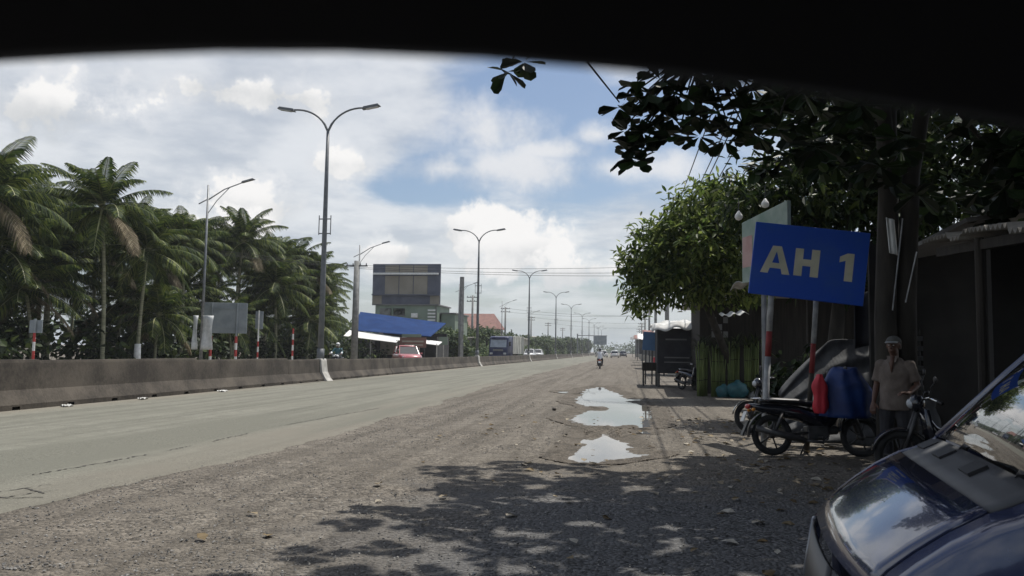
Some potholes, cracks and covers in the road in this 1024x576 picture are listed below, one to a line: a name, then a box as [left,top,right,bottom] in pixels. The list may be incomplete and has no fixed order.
pothole [546,386,677,429]
pothole [539,425,679,465]
